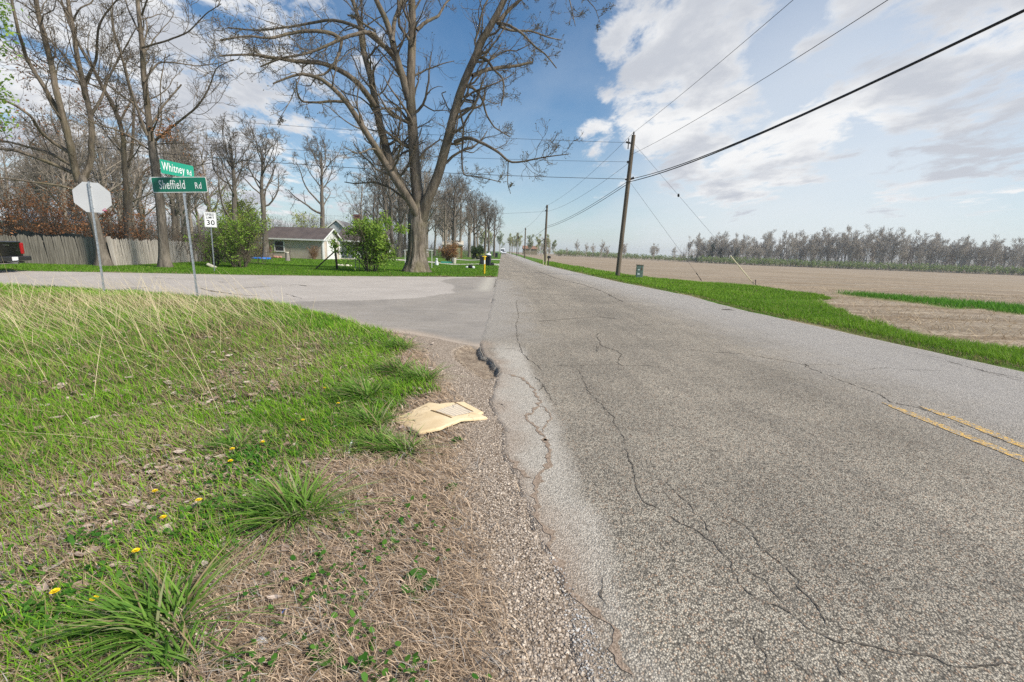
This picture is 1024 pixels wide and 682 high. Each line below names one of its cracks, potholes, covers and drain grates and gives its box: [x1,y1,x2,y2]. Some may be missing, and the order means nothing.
crack [489,301,1016,678]
